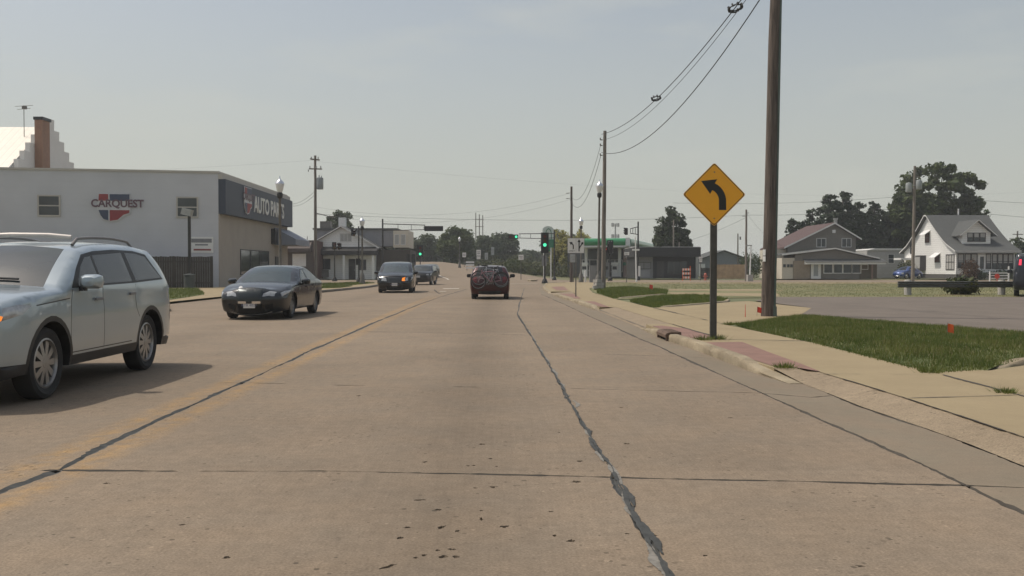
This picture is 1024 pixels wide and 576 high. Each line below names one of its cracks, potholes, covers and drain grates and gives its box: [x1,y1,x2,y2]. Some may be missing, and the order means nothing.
drain grate [656,329,681,341]
